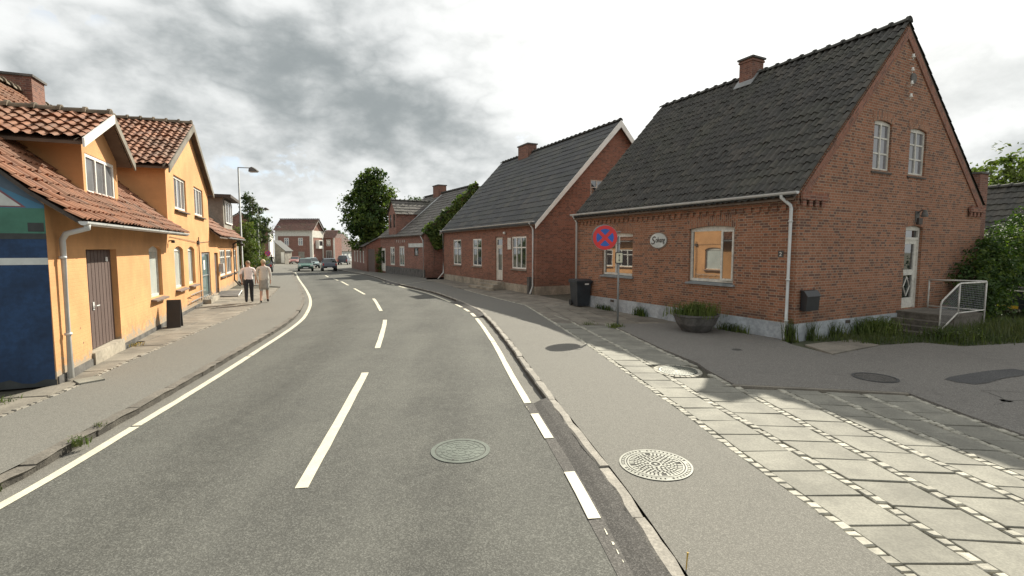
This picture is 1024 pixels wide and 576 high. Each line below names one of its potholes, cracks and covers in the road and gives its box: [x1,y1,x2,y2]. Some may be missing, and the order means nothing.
manhole cover [851,372,900,383]
manhole cover [431,439,490,463]
manhole cover [619,449,694,482]
manhole cover [658,366,698,376]
